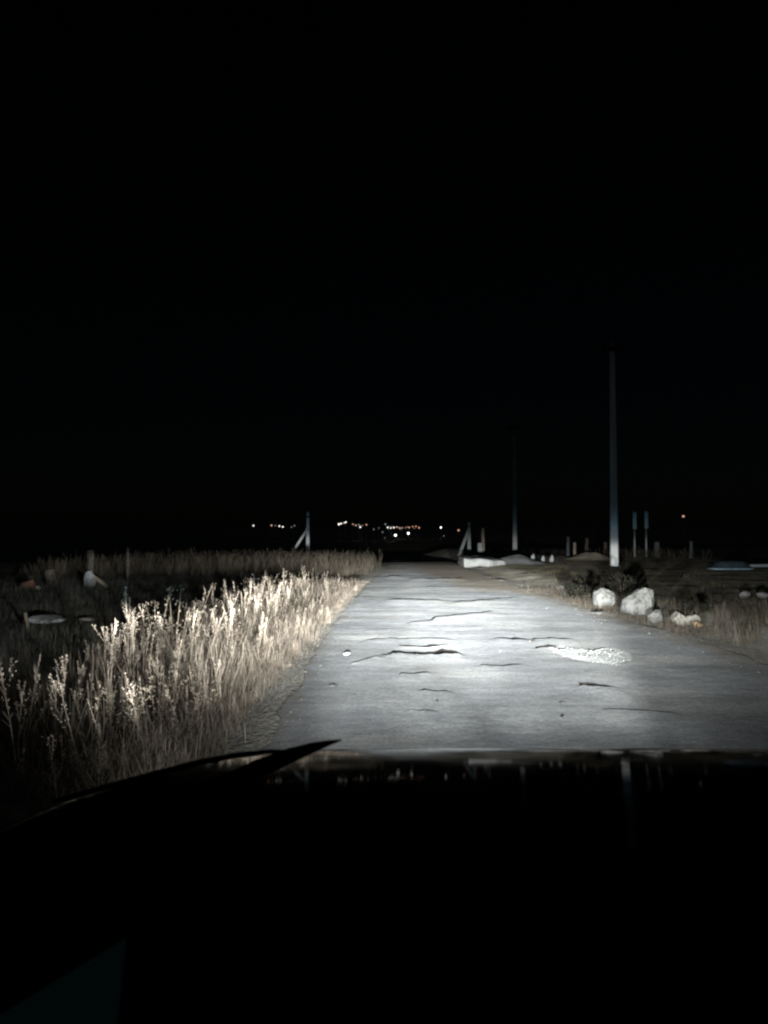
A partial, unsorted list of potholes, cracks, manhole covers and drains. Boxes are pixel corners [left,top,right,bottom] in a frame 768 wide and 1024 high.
pothole [548,646,633,665]
crack [480,637,569,666]
crack [354,597,517,663]
crack [400,671,448,691]
